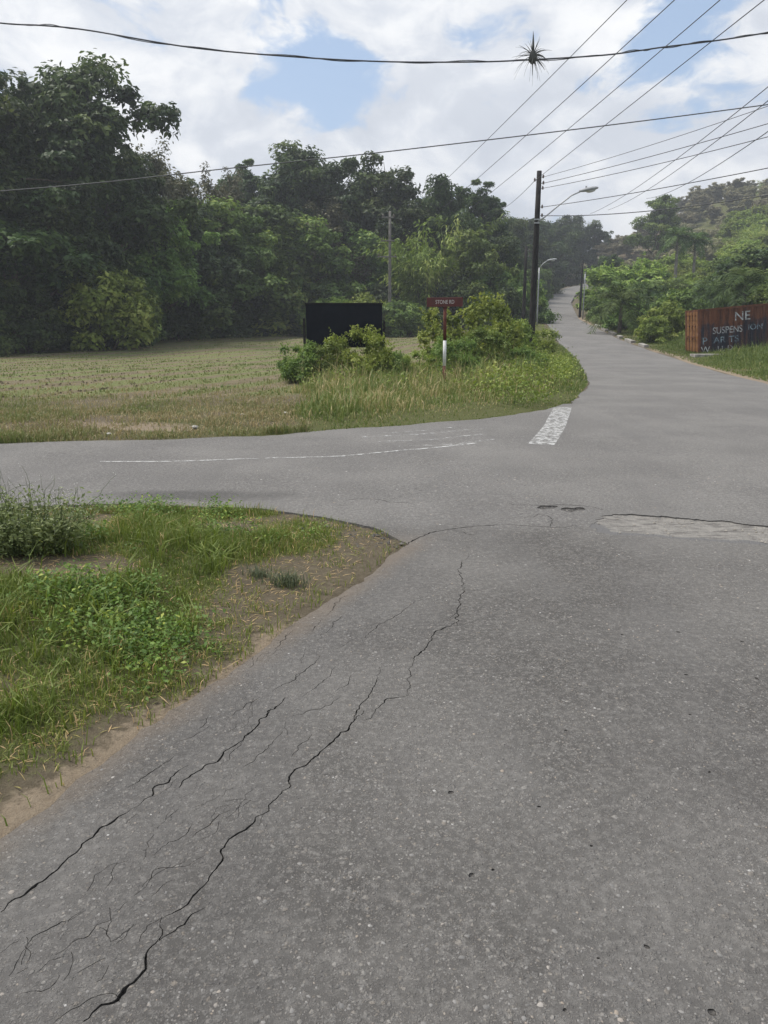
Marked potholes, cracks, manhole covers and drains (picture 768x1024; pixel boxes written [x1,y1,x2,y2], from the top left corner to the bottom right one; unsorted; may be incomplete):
crack [1,556,476,1022]
